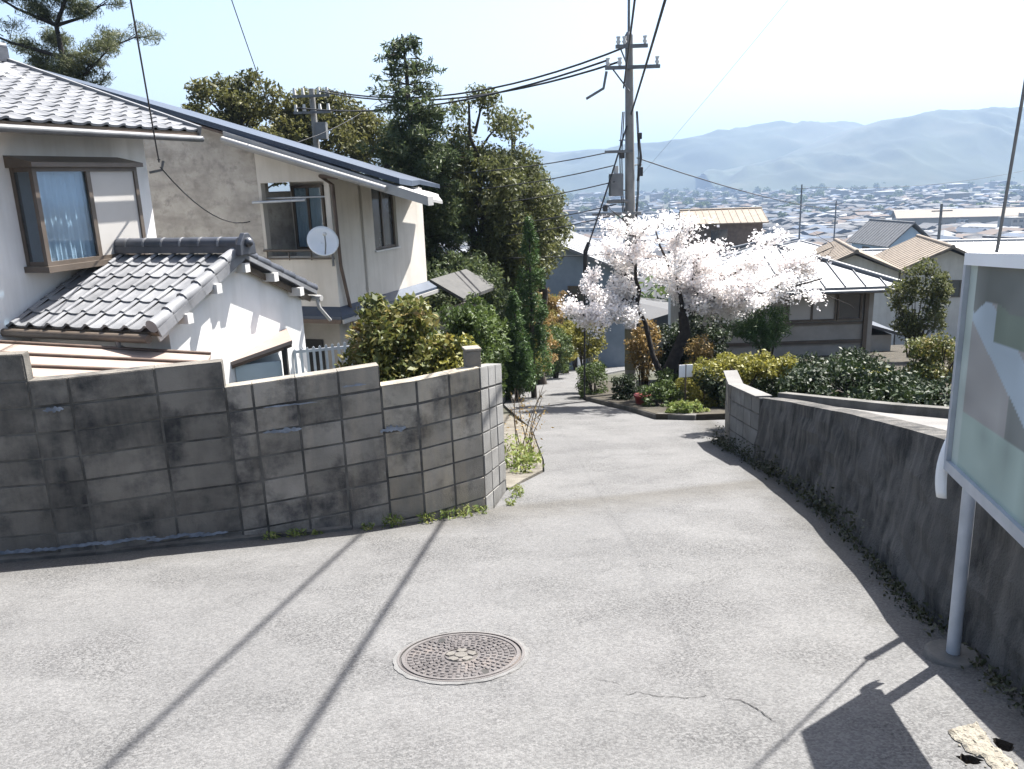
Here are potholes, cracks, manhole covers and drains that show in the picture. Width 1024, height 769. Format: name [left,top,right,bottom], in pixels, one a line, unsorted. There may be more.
crack [598,679,775,721]
pothole [991,737,1014,752]
pothole [956,753,984,764]
manhole cover [392,630,530,686]
